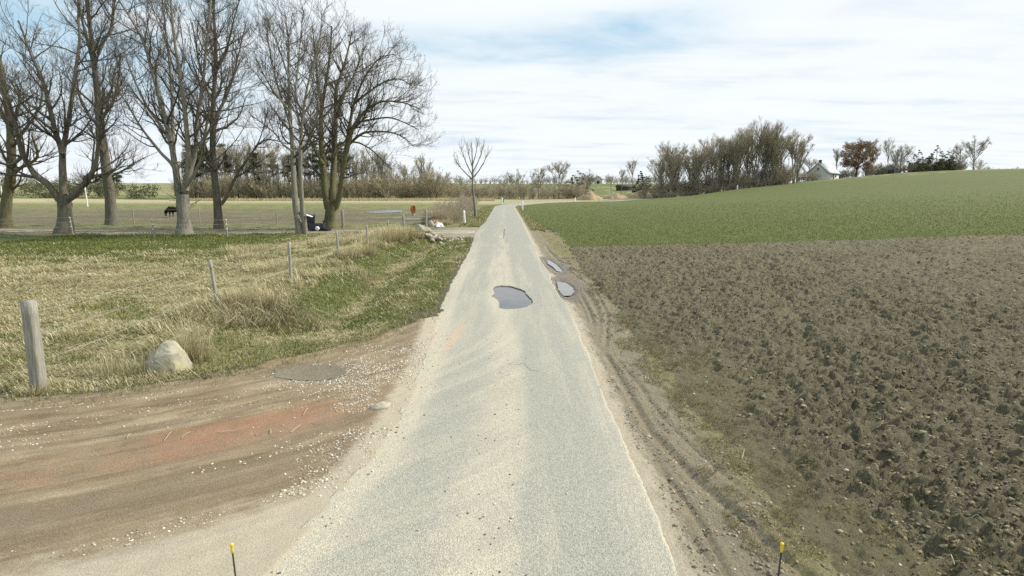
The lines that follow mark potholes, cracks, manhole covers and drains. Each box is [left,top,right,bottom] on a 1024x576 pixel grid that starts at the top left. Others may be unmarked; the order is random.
pothole [541,258,565,274]
pothole [492,285,533,309]
pothole [551,278,578,300]
